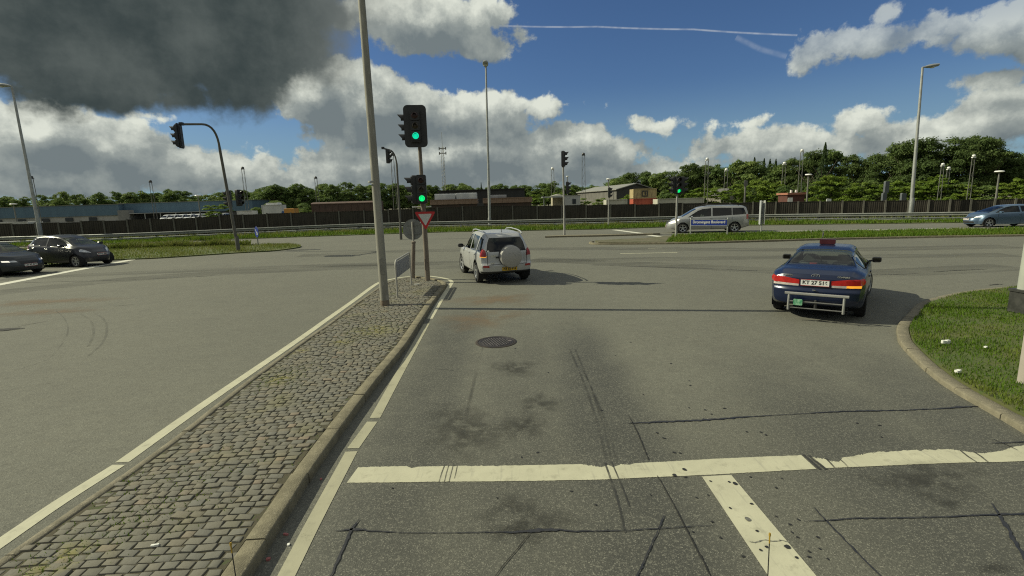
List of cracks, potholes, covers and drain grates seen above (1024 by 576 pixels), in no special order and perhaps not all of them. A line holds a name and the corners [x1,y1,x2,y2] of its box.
crack [628,415,711,576]
manhole cover [475,336,517,348]
crack [335,528,529,576]
